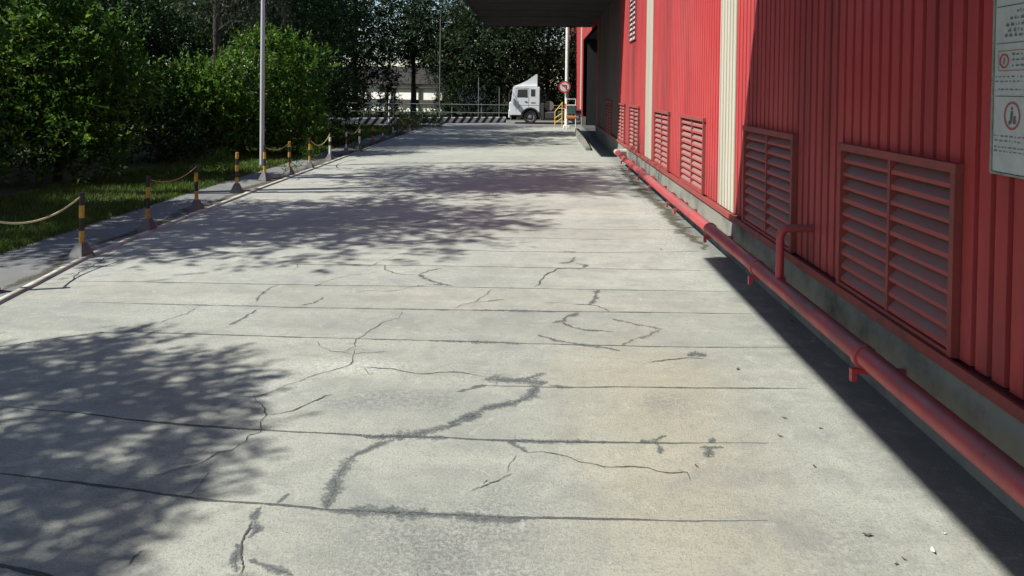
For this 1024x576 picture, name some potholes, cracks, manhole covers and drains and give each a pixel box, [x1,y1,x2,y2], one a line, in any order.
crack [538,251,588,285]
crack [143,311,575,508]
crack [539,290,658,351]
crack [229,493,293,575]
crack [471,435,724,491]
